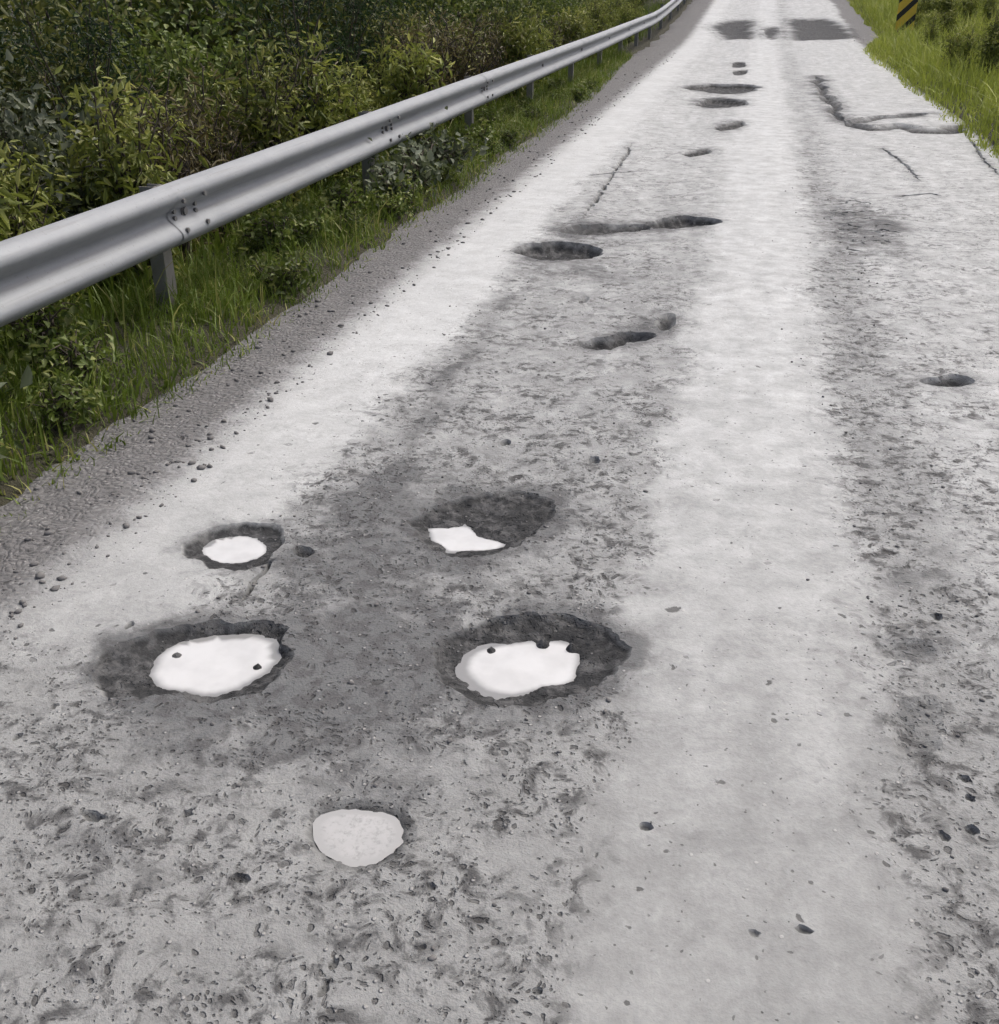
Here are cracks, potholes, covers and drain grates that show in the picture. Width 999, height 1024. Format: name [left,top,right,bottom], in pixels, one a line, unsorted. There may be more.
pothole [654,313,676,331]
pothole [509,241,604,261]
crack [580,144,636,220]
pothole [694,98,750,108]
pothole [92,619,295,704]
pothole [681,149,712,157]
pothole [644,215,723,229]
pothole [573,331,657,350]
pothole [431,611,633,708]
crack [809,76,999,197]
pothole [180,521,285,571]
pothole [713,121,746,131]
